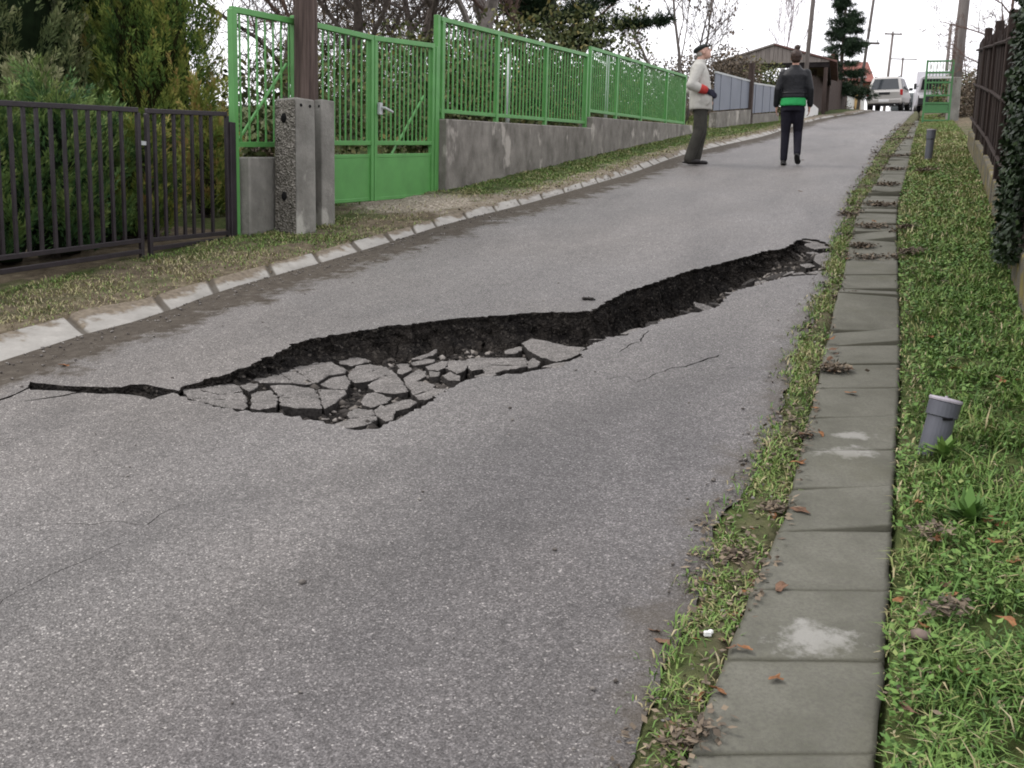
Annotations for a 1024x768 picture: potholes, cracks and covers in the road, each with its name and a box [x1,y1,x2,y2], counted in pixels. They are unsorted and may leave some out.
pothole [174,238,835,430]
crack [0,502,197,604]
crack [609,355,734,382]
